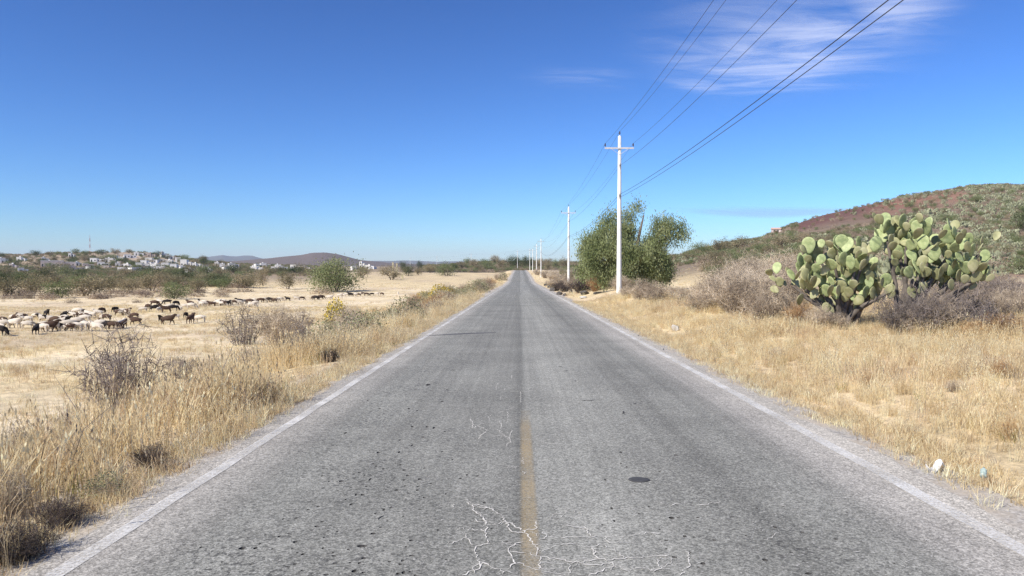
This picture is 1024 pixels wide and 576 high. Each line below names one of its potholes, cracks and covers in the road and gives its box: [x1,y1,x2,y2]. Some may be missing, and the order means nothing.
crack [451,493,697,575]
crack [470,376,525,474]
